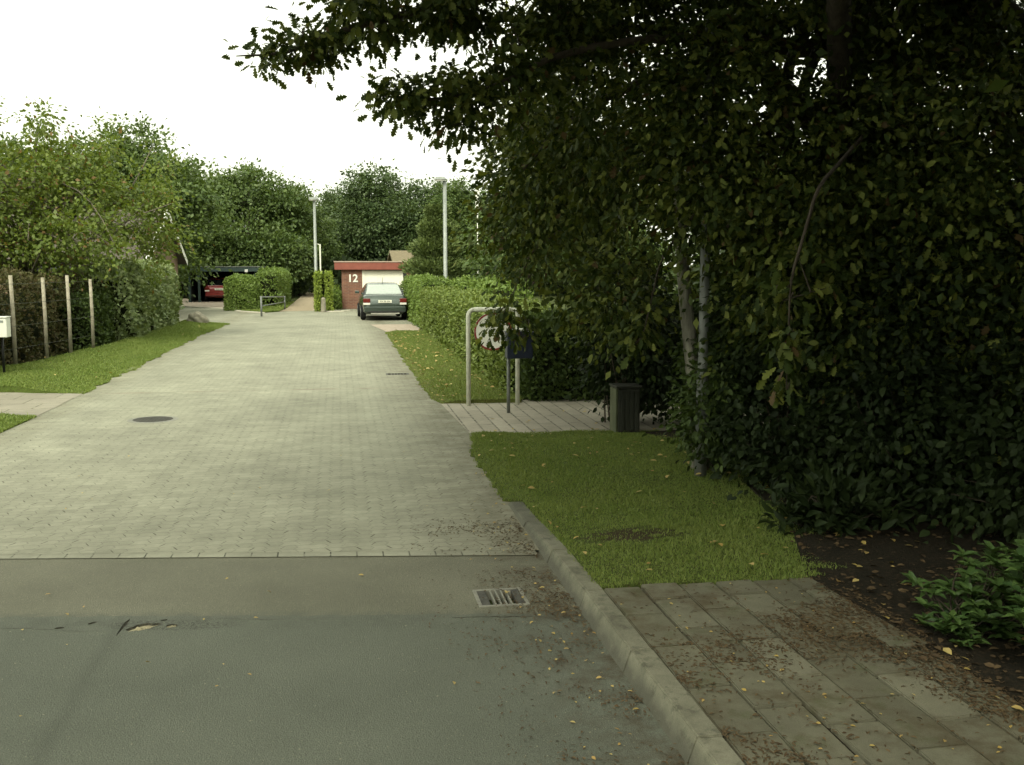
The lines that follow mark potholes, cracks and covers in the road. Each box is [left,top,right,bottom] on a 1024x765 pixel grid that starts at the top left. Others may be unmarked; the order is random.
pothole [126,623,161,632]
drain grate [472,587,530,608]
